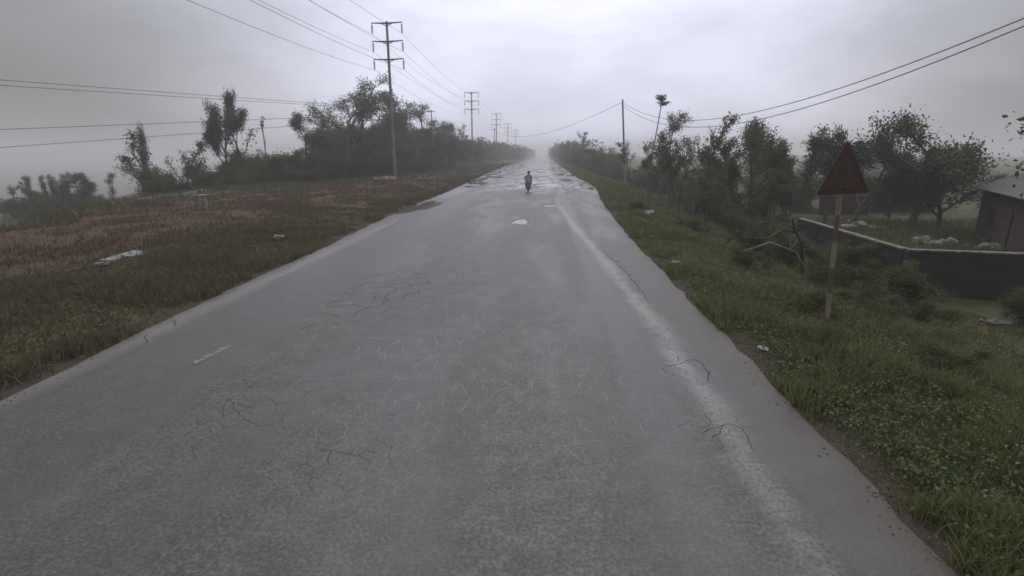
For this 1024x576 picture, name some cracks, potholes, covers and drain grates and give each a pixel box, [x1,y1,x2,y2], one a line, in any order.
crack [608,255,647,300]
crack [662,357,711,381]
crack [258,309,668,509]
crack [678,413,754,450]
crack [300,272,433,330]
